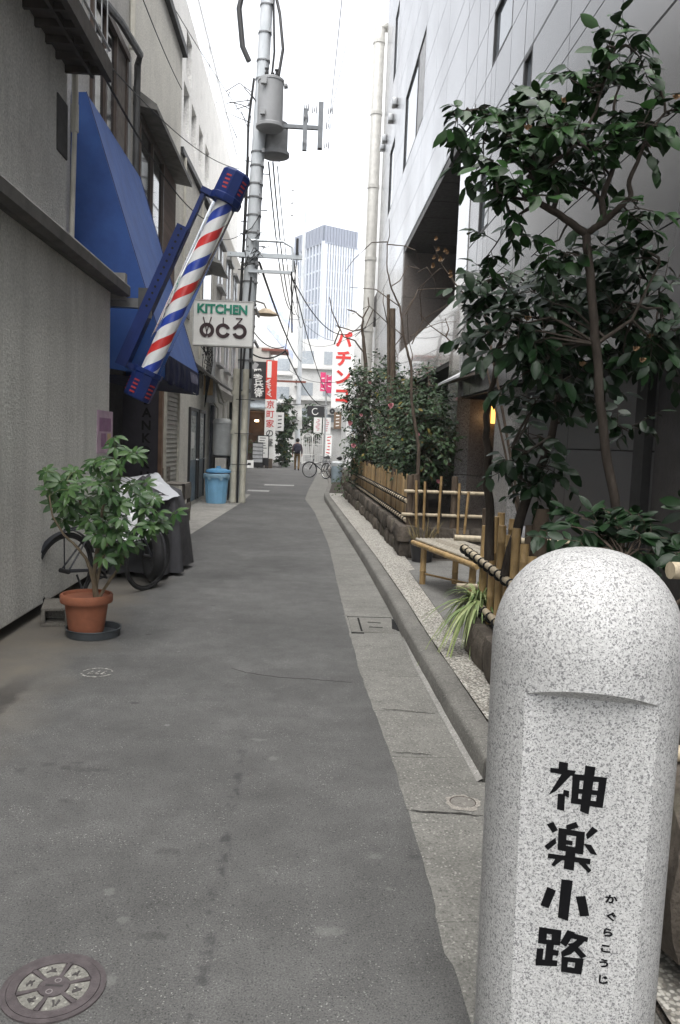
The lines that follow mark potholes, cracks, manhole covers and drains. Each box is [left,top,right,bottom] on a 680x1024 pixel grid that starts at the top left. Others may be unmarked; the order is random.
utility cover [445,794,481,811]
manhole cover [0,953,107,1024]
